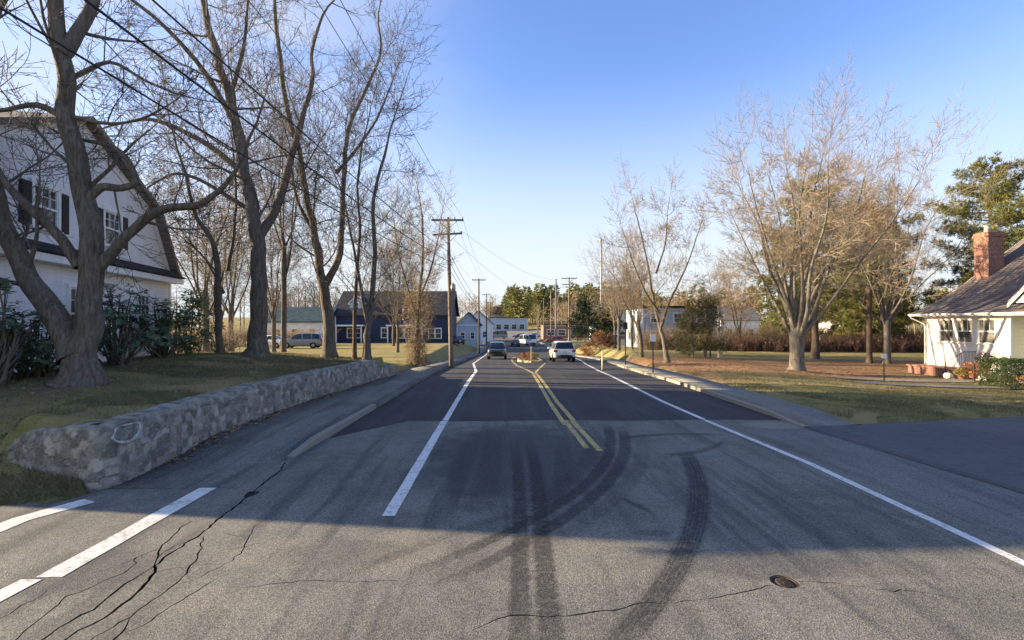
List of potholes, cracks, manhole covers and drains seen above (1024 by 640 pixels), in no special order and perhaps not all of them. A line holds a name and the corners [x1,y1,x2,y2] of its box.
crack [802,581,960,599]
crack [472,585,770,631]
manhole cover [769,575,799,589]
crack [2,462,397,640]
